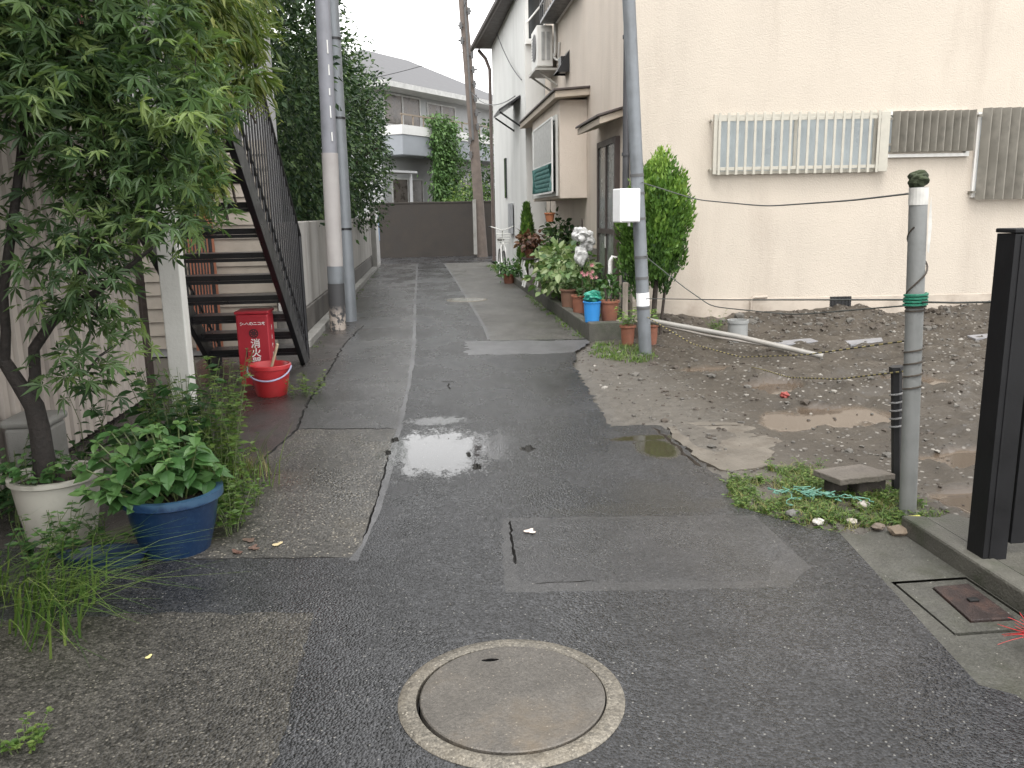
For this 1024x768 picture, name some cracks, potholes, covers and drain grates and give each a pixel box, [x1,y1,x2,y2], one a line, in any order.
crack [363,456,389,538]
crack [224,325,394,494]
manhole cover [398,639,625,768]
manhole cover [933,584,1014,623]
